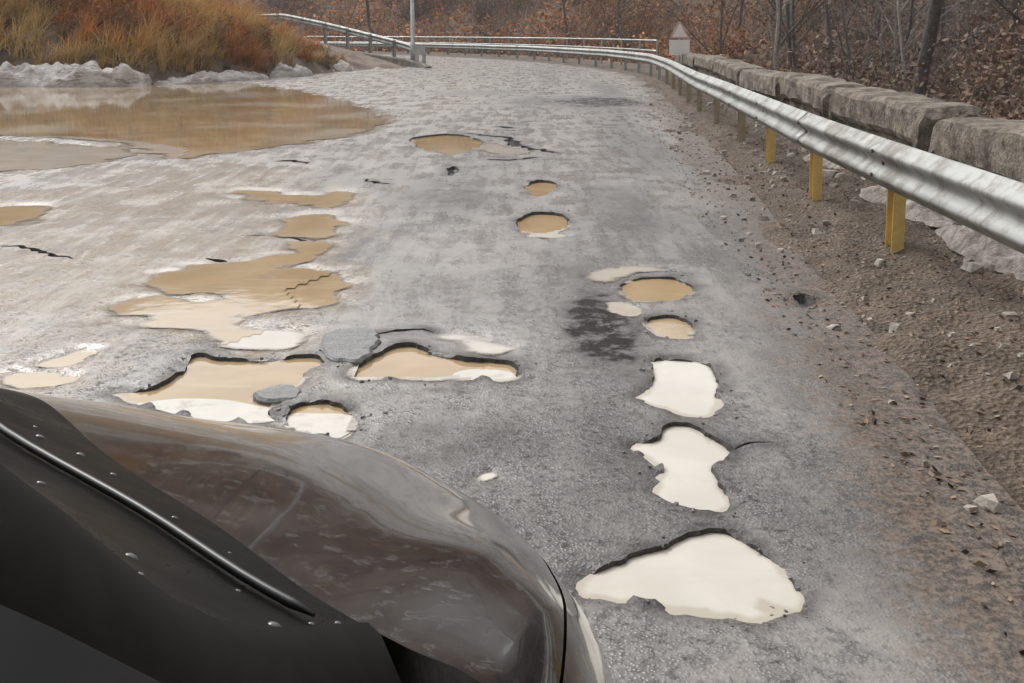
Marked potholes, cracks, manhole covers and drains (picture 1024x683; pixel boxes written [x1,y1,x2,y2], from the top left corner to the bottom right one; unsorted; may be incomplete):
pothole [276,398,388,439]
pothole [524,180,569,196]
pothole [113,348,325,423]
pothole [337,342,537,385]
pothole [627,357,738,418]
crack [2,245,73,259]
pothole [500,210,577,234]
pothole [567,514,808,627]
pothole [622,420,740,525]
pothole [409,134,483,154]
crack [467,126,557,161]
pothole [602,274,700,302]
